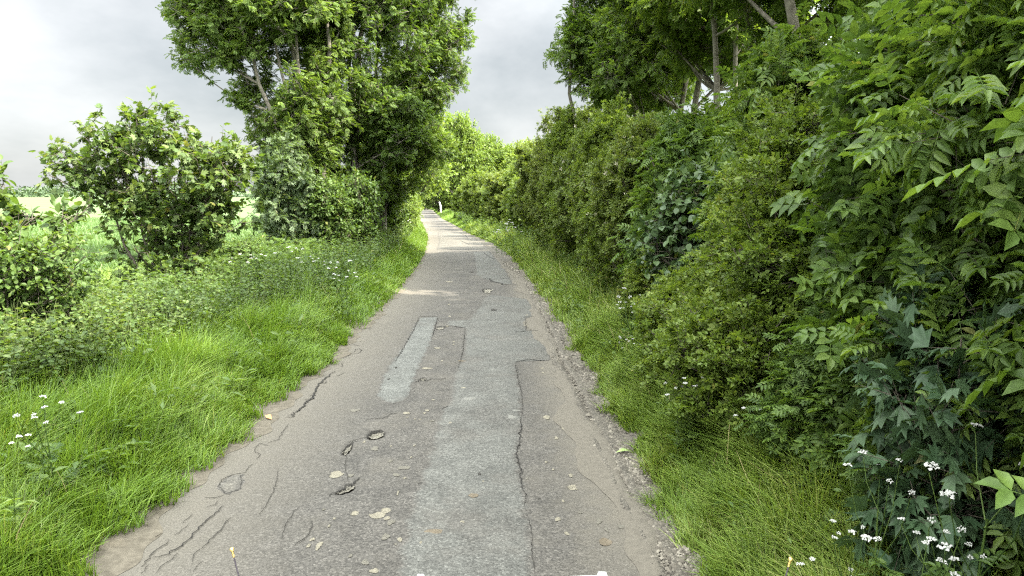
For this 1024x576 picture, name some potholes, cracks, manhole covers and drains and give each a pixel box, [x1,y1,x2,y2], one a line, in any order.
pothole [367,429,384,440]
crack [515,359,548,502]
crack [141,349,361,573]
